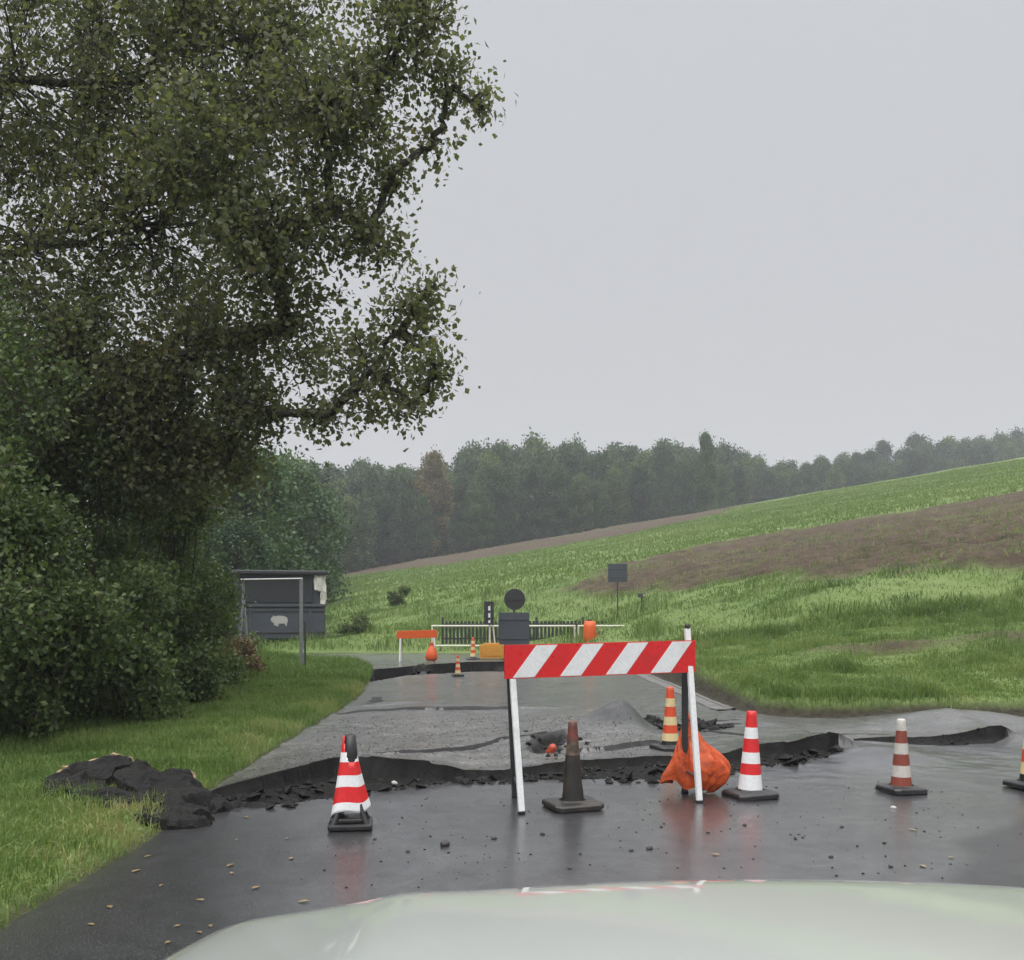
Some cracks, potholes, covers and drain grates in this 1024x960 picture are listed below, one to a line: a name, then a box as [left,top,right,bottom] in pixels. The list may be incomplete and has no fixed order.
pothole [722,732,839,768]
crack [335,706,508,715]
pothole [370,661,504,682]
pothole [526,728,567,754]
pothole [212,756,464,805]
crack [372,719,744,782]
